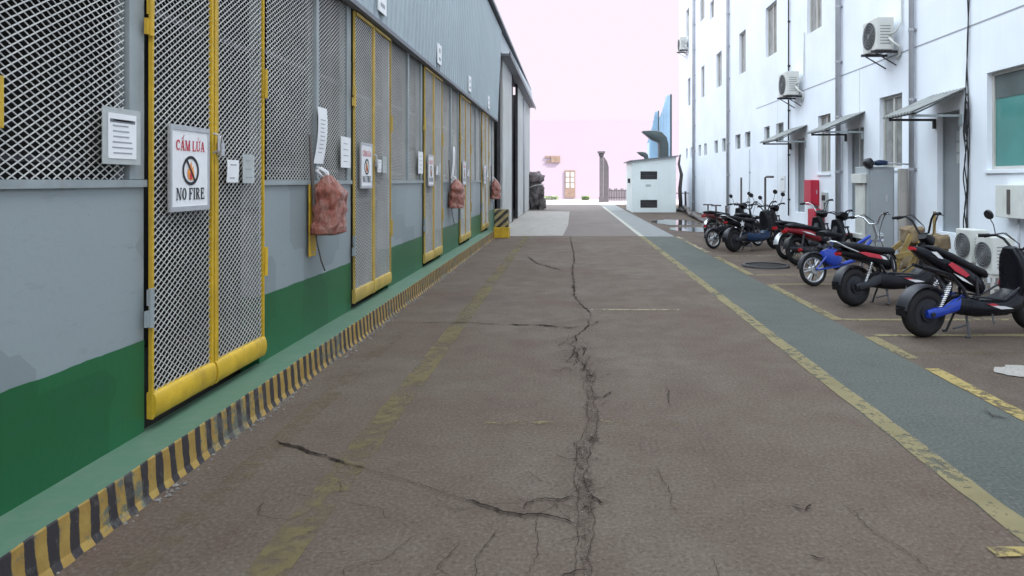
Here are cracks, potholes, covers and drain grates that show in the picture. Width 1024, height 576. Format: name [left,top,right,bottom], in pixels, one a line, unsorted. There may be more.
crack [276,242,611,576]
